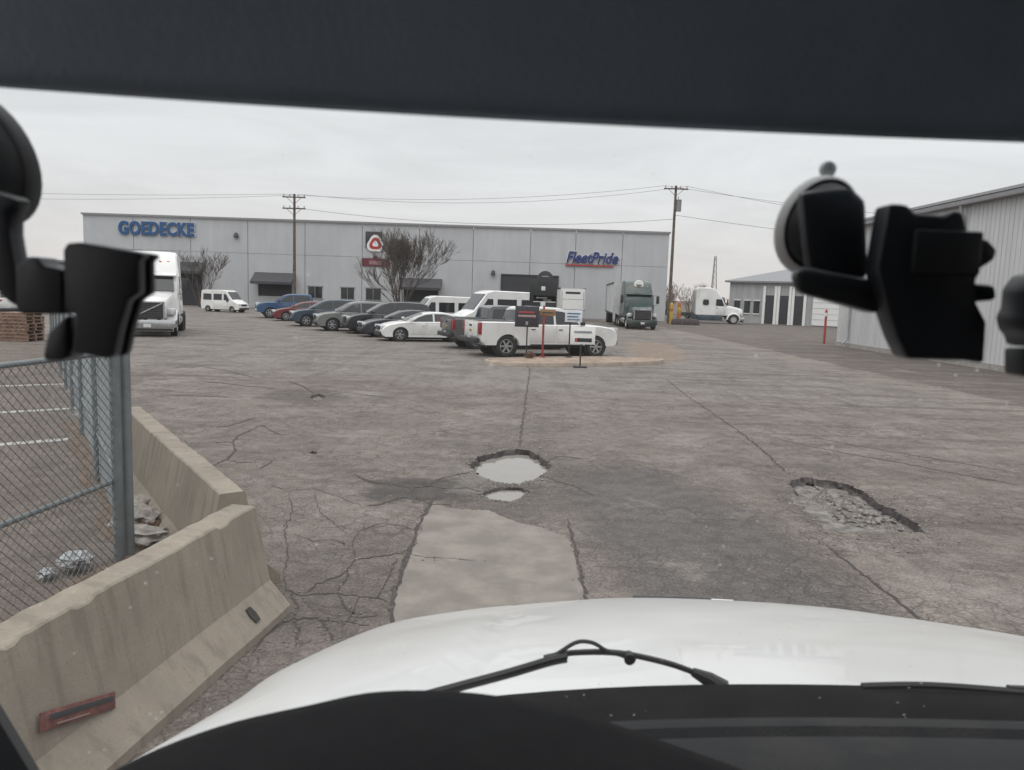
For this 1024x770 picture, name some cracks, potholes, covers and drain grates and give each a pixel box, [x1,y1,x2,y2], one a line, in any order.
pothole [482,487,530,502]
pothole [788,477,925,533]
crack [253,471,485,652]
crack [214,418,281,468]
pothole [469,449,553,484]
crack [826,544,921,620]
